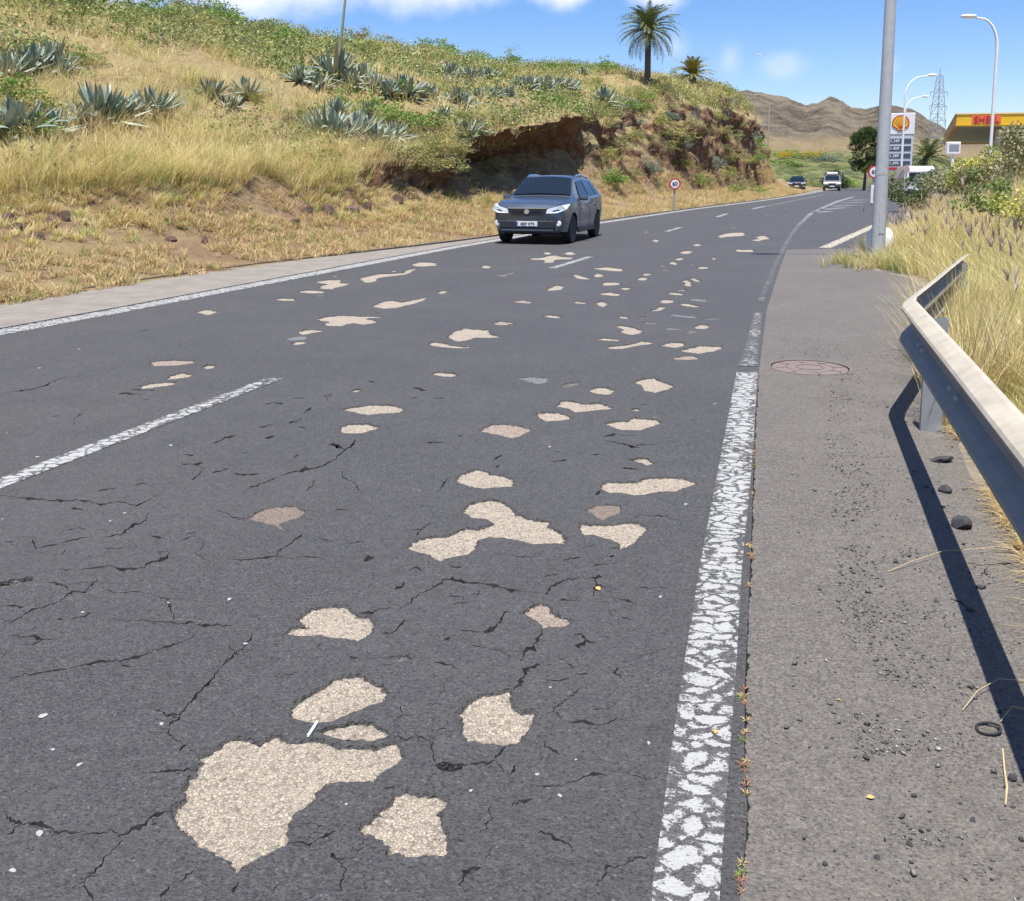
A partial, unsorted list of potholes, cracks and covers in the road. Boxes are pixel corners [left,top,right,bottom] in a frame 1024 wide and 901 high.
crack [359,545,663,725]
crack [287,823,364,901]
crack [459,806,496,891]
crack [0,483,262,775]
crack [183,435,360,494]
crack [392,706,447,764]
crack [160,870,196,901]
crack [512,772,604,806]
crack [596,854,657,886]
manhole cover [769,360,851,375]
pothole [436,761,467,772]
crack [259,393,332,439]
